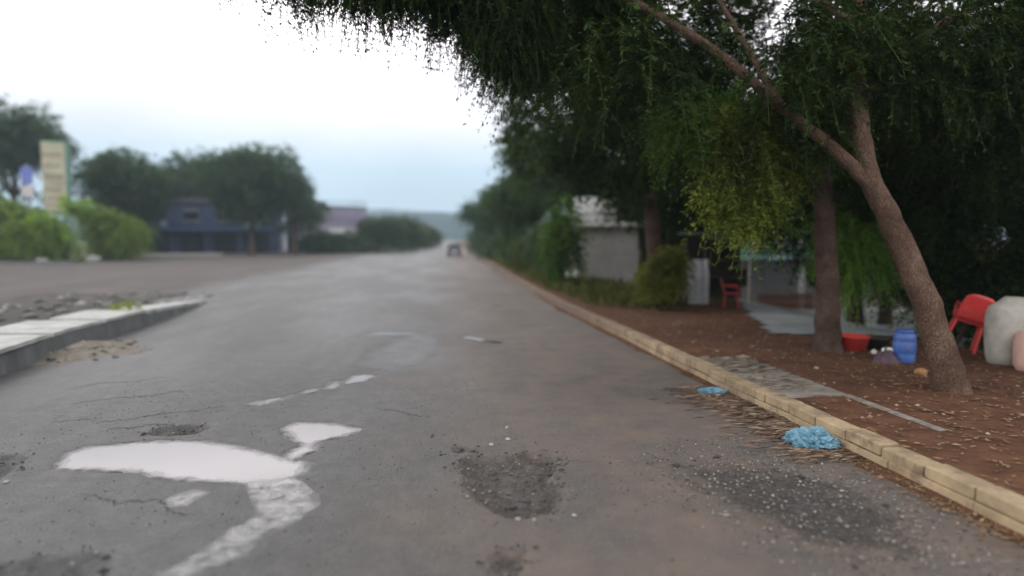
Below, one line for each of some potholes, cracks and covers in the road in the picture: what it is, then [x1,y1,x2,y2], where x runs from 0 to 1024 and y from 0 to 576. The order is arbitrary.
crack [53,379,221,429]
crack [80,493,203,515]
pothole [137,422,208,437]
pothole [443,449,581,523]
